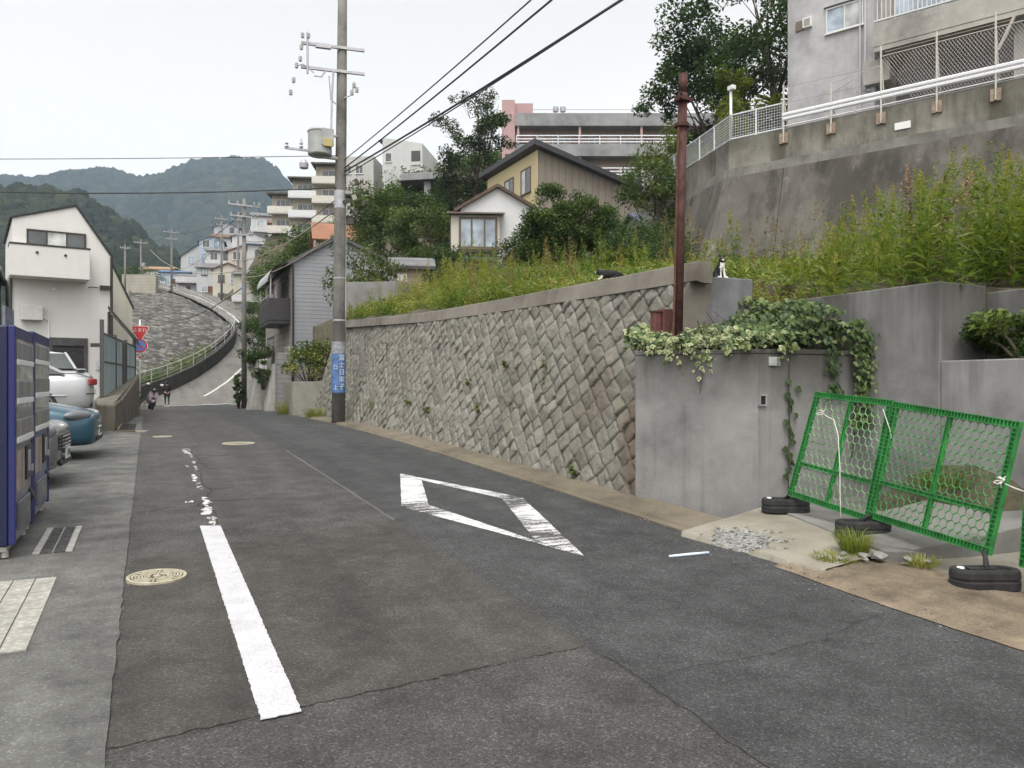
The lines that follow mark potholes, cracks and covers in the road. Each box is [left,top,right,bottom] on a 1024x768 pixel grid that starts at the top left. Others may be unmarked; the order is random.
crack [190,451,275,523]
manhole cover [126,568,187,585]
crack [584,613,885,768]
